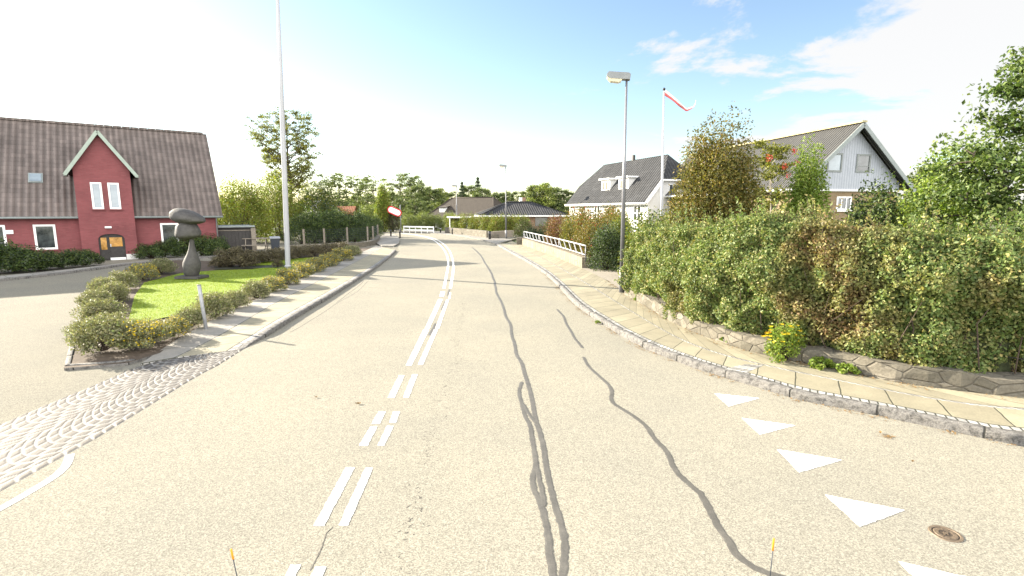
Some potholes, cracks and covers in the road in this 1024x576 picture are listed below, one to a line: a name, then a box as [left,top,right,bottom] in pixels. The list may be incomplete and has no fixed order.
manhole cover [928,525,964,543]
crack [310,527,333,570]
